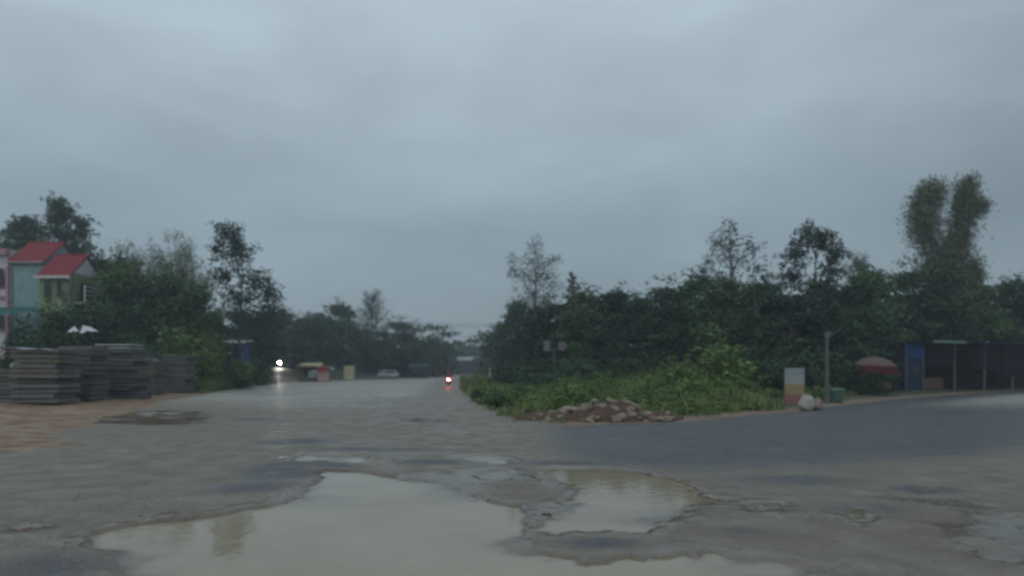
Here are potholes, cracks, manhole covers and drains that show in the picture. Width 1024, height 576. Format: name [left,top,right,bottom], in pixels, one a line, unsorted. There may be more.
pothole [453,455,519,465]
pothole [831,504,882,527]
pothole [98,412,212,425]
pothole [58,468,852,576]
